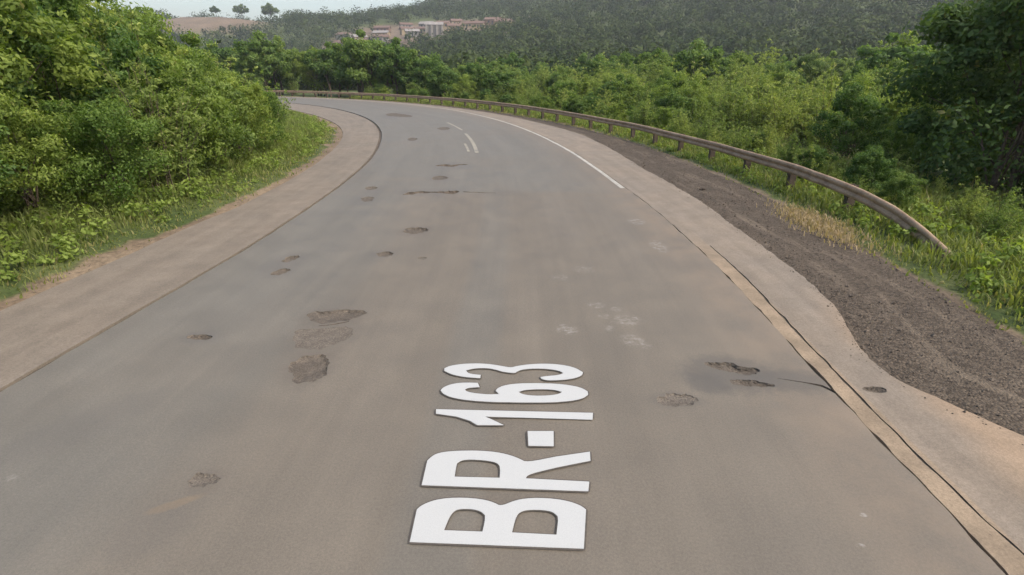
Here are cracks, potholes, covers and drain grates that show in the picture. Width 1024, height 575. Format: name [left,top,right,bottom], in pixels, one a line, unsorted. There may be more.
pothole [187,472,221,488]
pothole [288,354,330,384]
pothole [307,310,367,324]
pothole [704,362,760,375]
pothole [730,380,775,388]
pothole [657,393,699,407]
